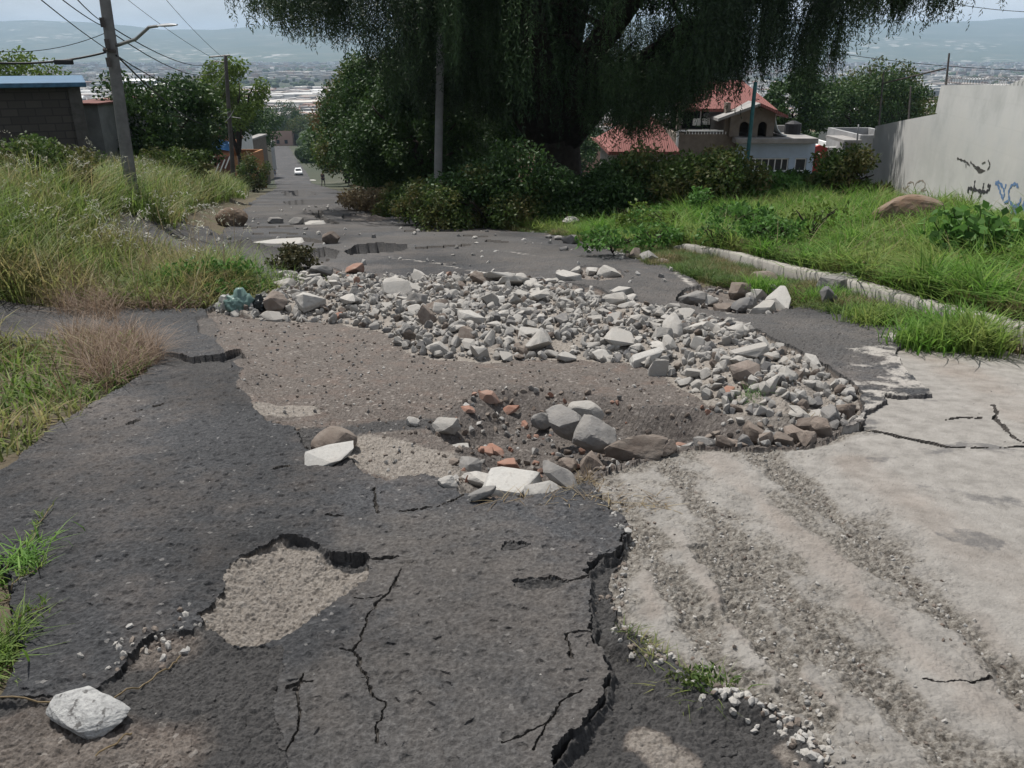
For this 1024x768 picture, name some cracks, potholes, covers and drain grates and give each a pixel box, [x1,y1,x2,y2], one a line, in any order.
pothole [205,267,866,499]
crack [339,555,402,743]
pothole [196,533,370,648]
crack [945,404,1024,443]
crack [371,487,465,514]
crack [501,689,583,751]
crack [564,630,592,659]
crack [922,674,993,684]
pothole [344,242,407,255]
